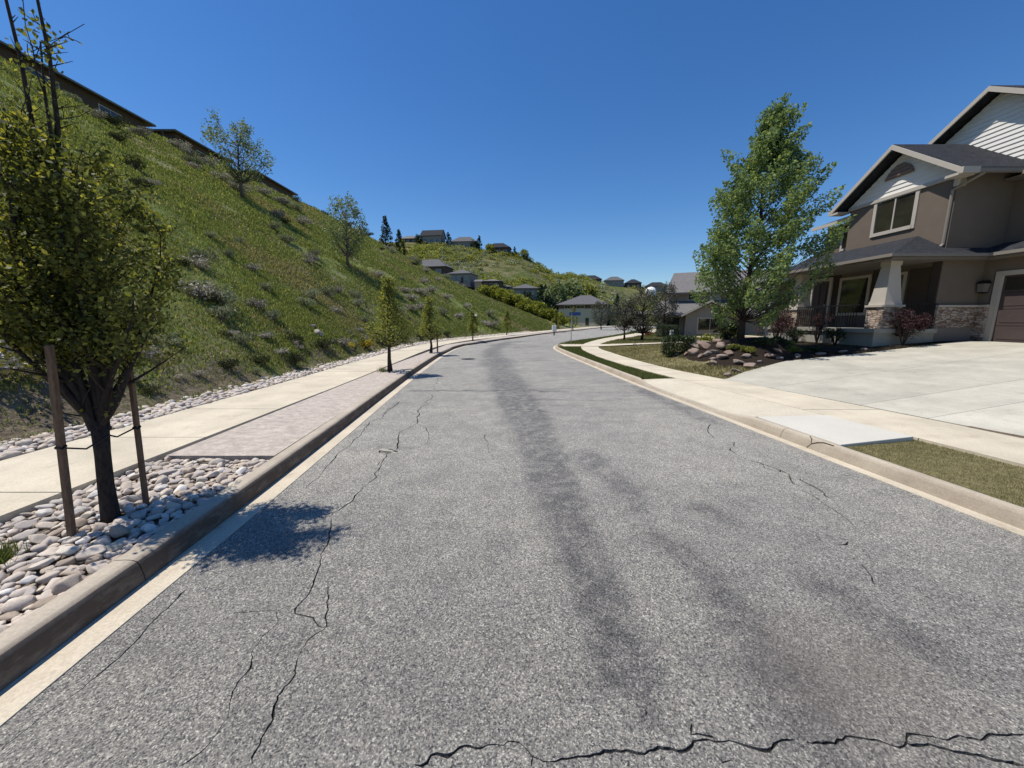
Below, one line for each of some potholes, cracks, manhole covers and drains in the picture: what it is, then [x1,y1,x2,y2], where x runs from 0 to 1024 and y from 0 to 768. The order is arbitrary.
crack [190,526,331,762]
crack [812,734,1022,766]
crack [419,711,793,767]
